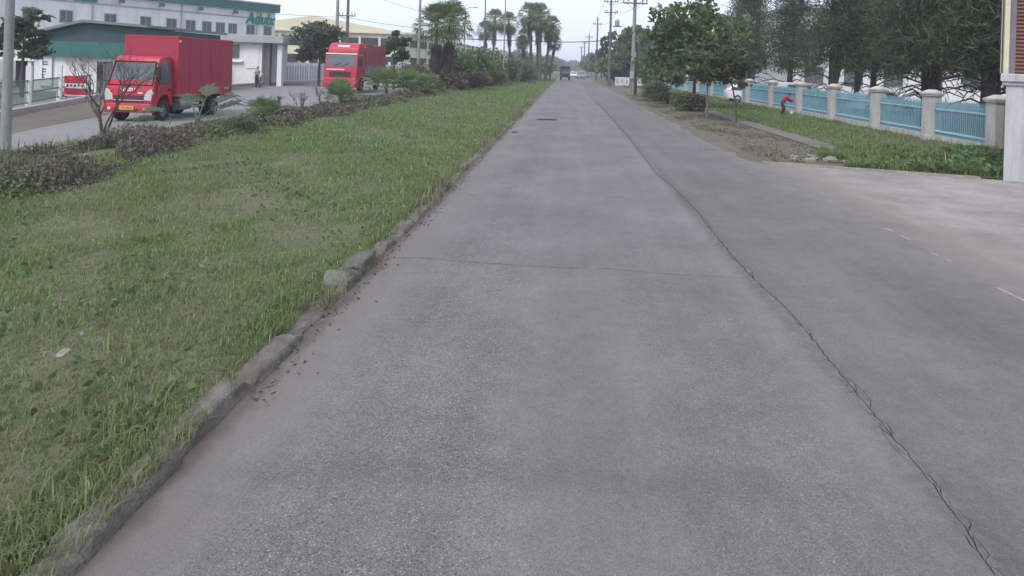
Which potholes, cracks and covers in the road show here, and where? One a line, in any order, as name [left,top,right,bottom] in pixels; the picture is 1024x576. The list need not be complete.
crack [411,90,1005,576]
